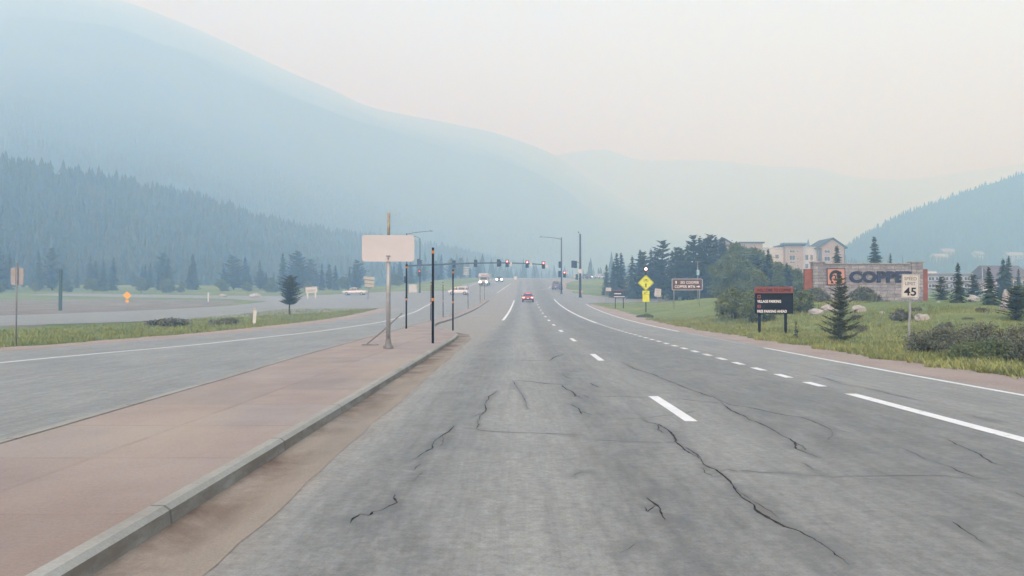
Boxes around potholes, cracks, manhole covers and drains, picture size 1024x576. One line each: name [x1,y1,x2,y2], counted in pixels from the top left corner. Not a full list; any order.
crack [607,415,1001,564]
crack [350,496,397,523]
